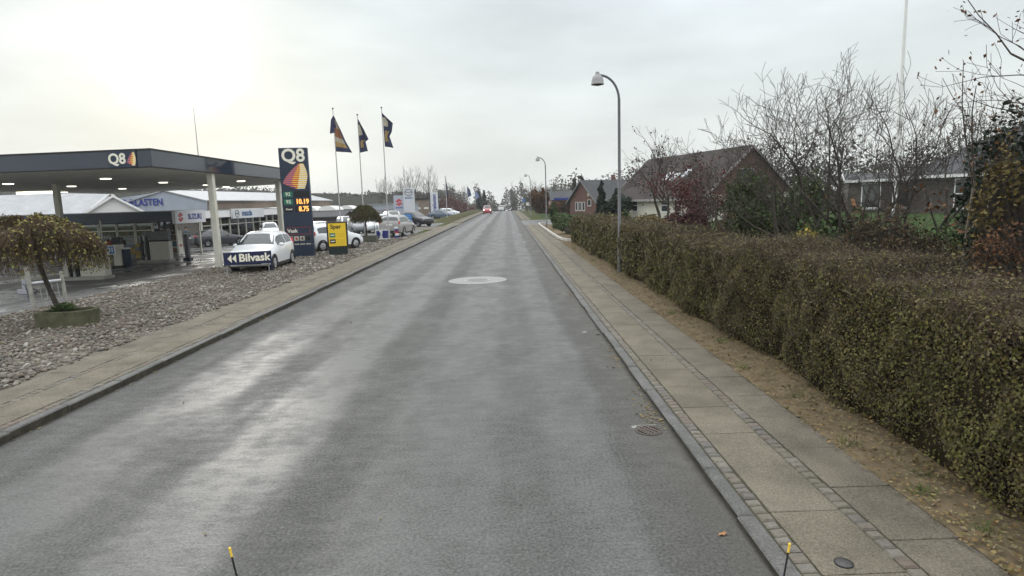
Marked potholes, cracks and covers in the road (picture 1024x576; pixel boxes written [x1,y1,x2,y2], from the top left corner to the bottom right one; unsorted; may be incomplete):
utility cover [834,557,854,569]
drain grate [631,424,663,436]
manhole cover [448,276,507,284]
